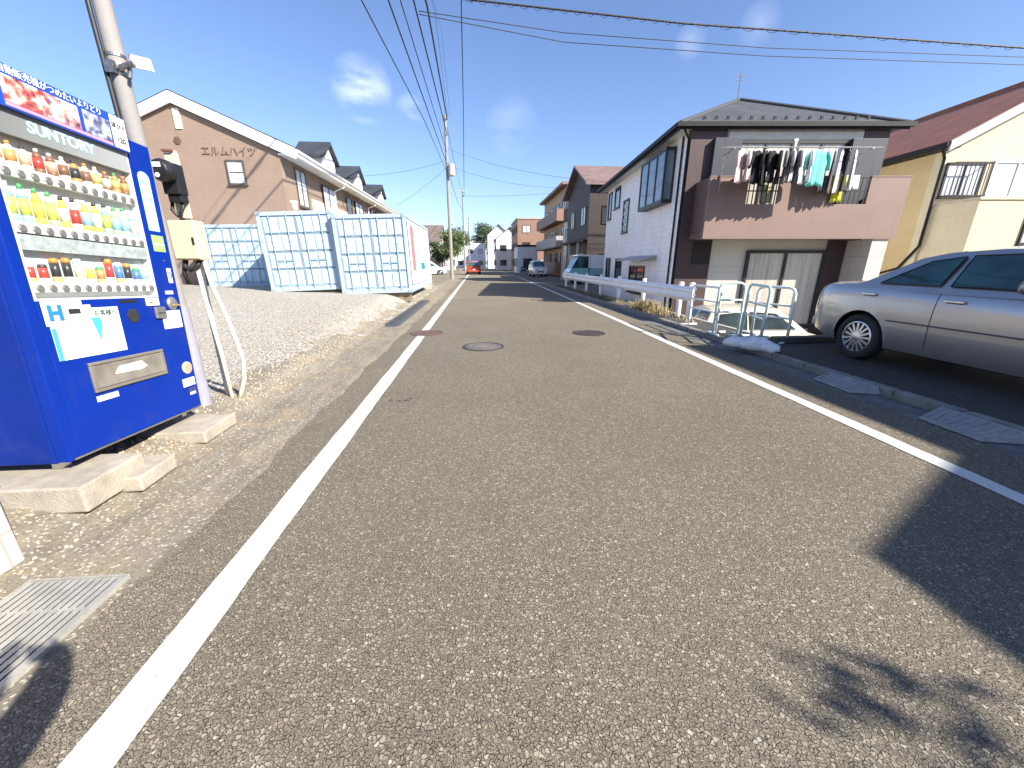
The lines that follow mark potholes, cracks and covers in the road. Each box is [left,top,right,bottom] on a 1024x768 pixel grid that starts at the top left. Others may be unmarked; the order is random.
manhole cover [462,342,504,351]
drain grate [0,574,132,696]
